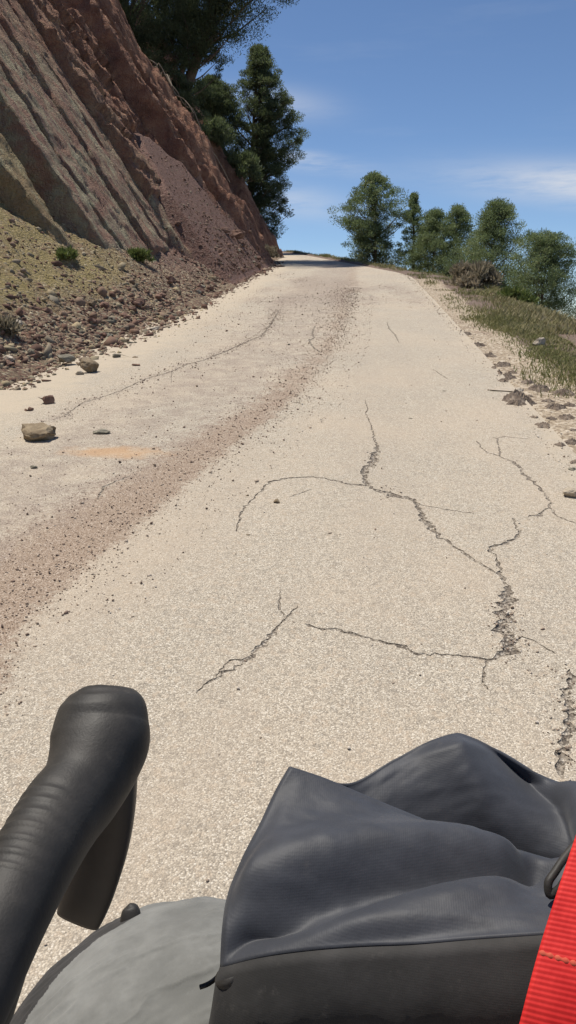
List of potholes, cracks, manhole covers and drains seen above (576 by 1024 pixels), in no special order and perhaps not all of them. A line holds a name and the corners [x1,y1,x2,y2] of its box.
crack [51,310,279,421]
crack [196,401,576,779]
